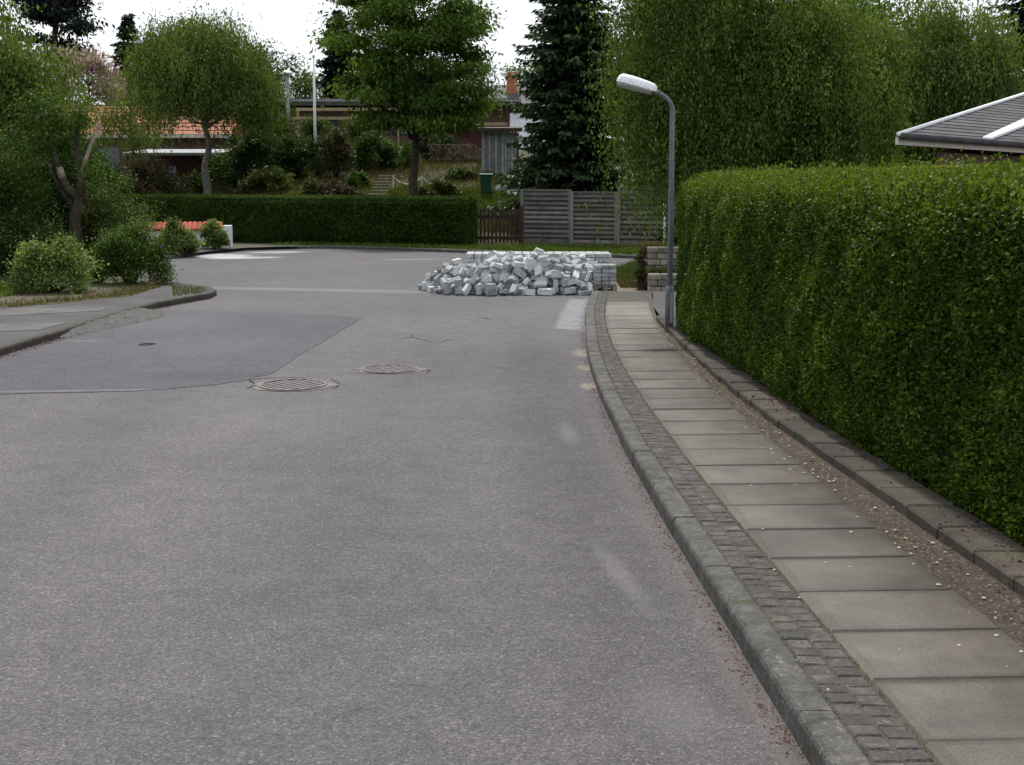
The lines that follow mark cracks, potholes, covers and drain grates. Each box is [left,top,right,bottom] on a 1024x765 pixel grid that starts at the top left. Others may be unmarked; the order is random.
manhole cover [251,378,339,392]
manhole cover [356,364,427,374]
